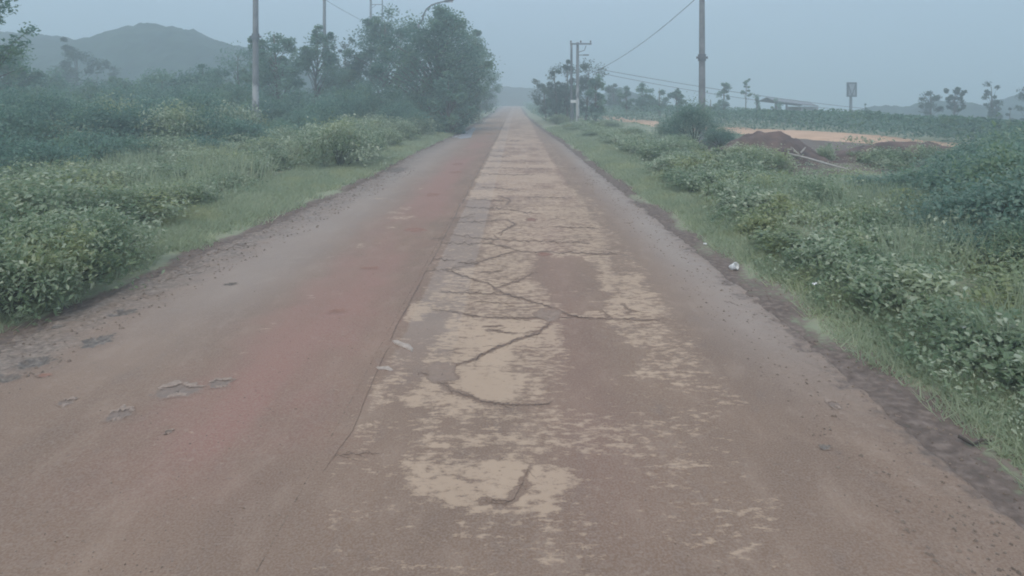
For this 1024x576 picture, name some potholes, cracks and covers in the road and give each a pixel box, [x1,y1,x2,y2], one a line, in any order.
crack [484,466,537,507]
pothole [77,332,121,350]
pothole [3,352,64,372]
pothole [55,396,78,407]
pothole [202,377,239,389]
crack [418,372,553,409]
pothole [100,404,137,424]
crack [429,128,645,366]
pothole [145,380,211,401]
